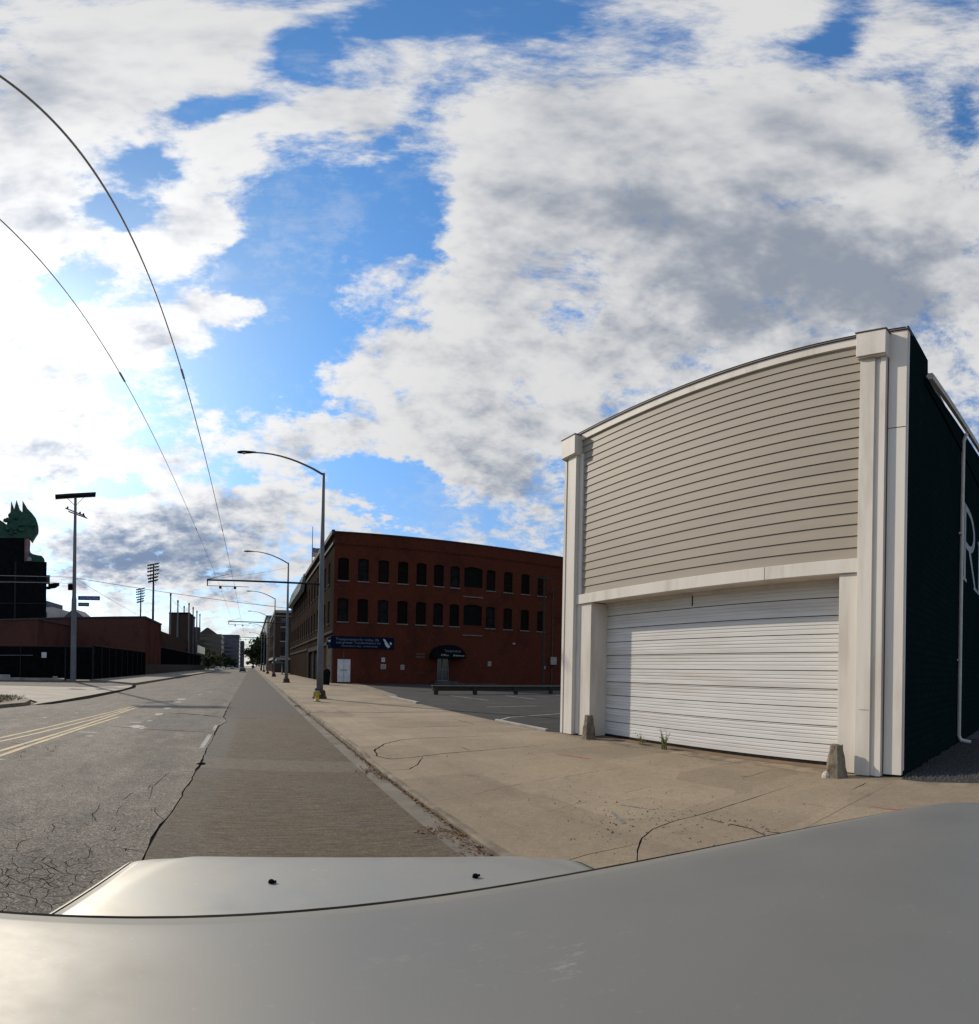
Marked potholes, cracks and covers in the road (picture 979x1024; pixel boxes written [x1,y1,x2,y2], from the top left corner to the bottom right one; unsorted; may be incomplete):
crack [374,720,537,770]
crack [0,774,167,913]
crack [106,685,261,860]
crack [598,740,807,861]
